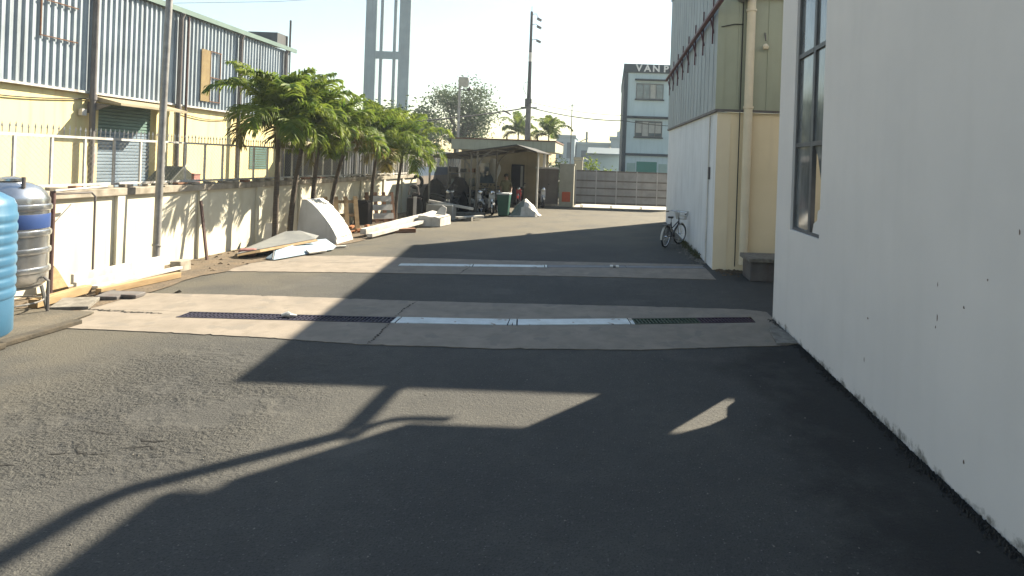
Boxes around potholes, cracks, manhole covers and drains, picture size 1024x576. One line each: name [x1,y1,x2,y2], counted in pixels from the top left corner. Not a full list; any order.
drain grate [283,315,396,323]
drain grate [177,312,288,320]
